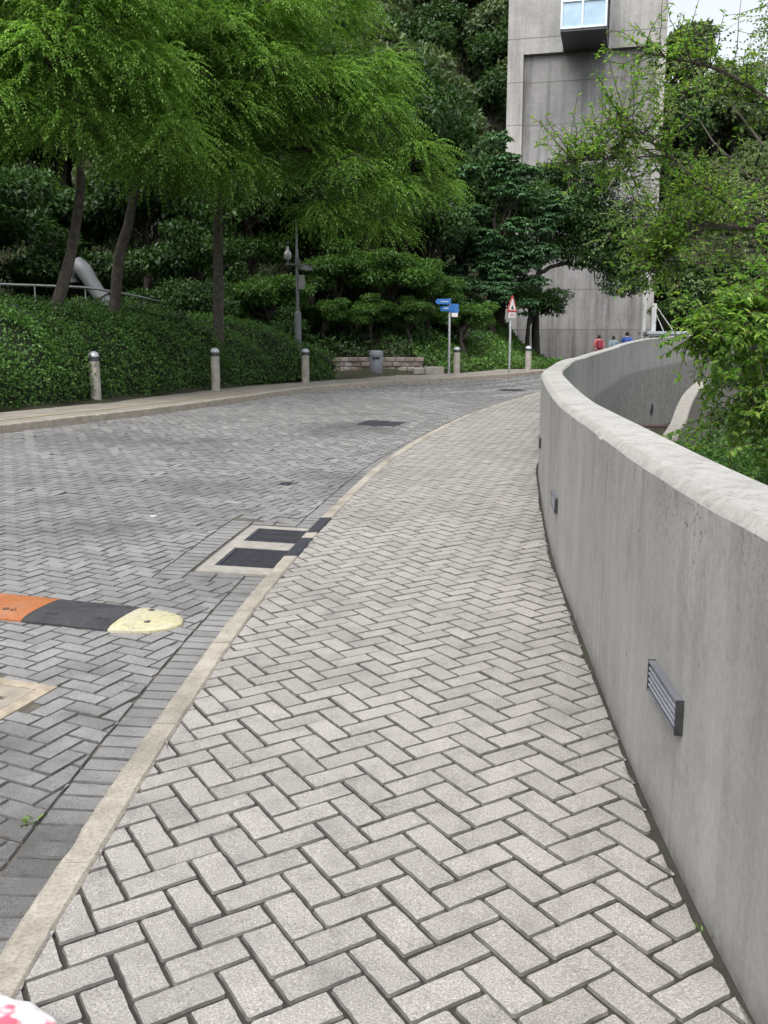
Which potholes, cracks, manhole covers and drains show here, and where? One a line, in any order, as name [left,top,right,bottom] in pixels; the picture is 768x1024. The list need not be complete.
manhole cover [0,678,58,721]
manhole cover [355,420,406,428]
drain grate [244,517,332,544]
drain grate [215,538,313,569]
